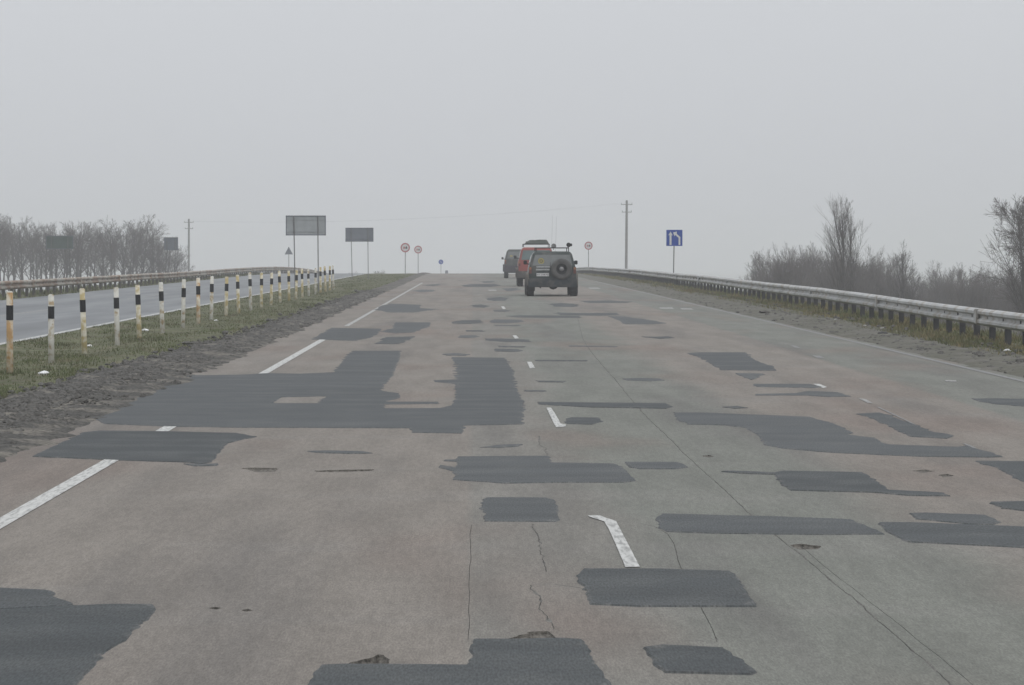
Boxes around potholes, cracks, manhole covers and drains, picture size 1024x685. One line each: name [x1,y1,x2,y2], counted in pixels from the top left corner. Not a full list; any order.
crack [801,546,973,685]
pothole [510,631,555,639]
crack [615,520,682,569]
crack [530,524,579,630]
pothole [349,654,390,664]
